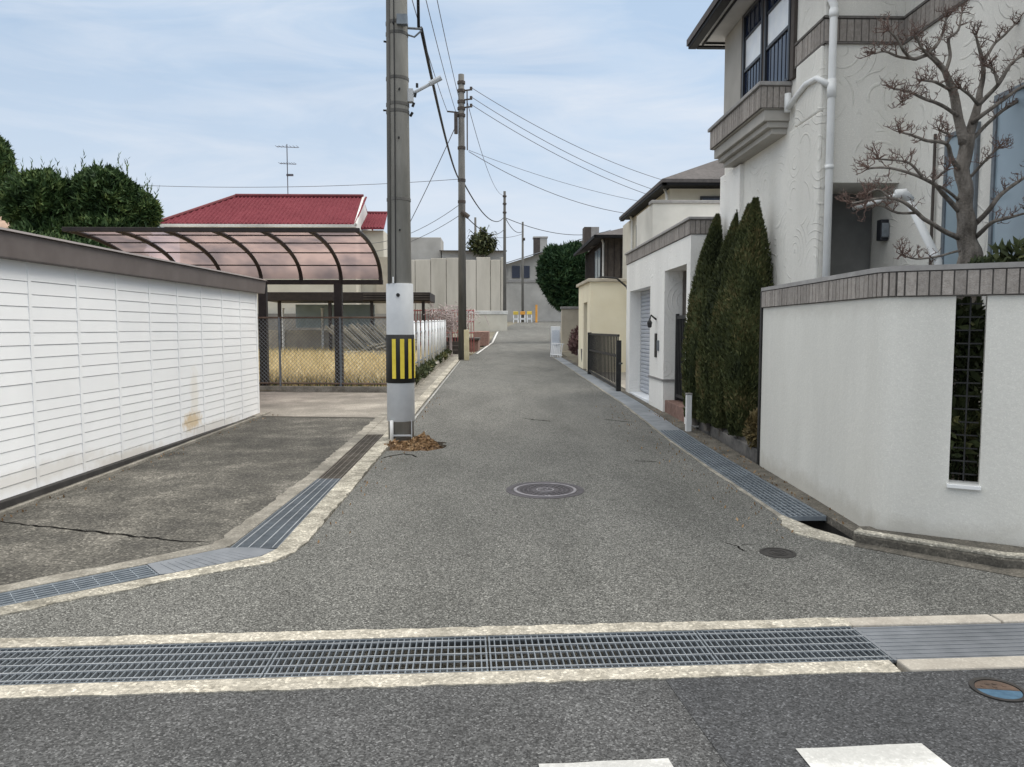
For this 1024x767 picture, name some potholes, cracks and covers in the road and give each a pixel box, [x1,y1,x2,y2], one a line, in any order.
drain grate [262,636,489,678]
drain grate [659,430,702,444]
drain grate [282,478,342,508]
drain grate [17,641,282,685]
drain grate [695,626,894,665]
manhole cover [969,677,1024,703]
drain grate [703,462,772,485]
drain grate [488,631,720,671]
drain grate [319,460,358,479]
drain grate [355,434,384,446]
drain grate [339,446,372,461]
drain grate [0,647,63,685]
